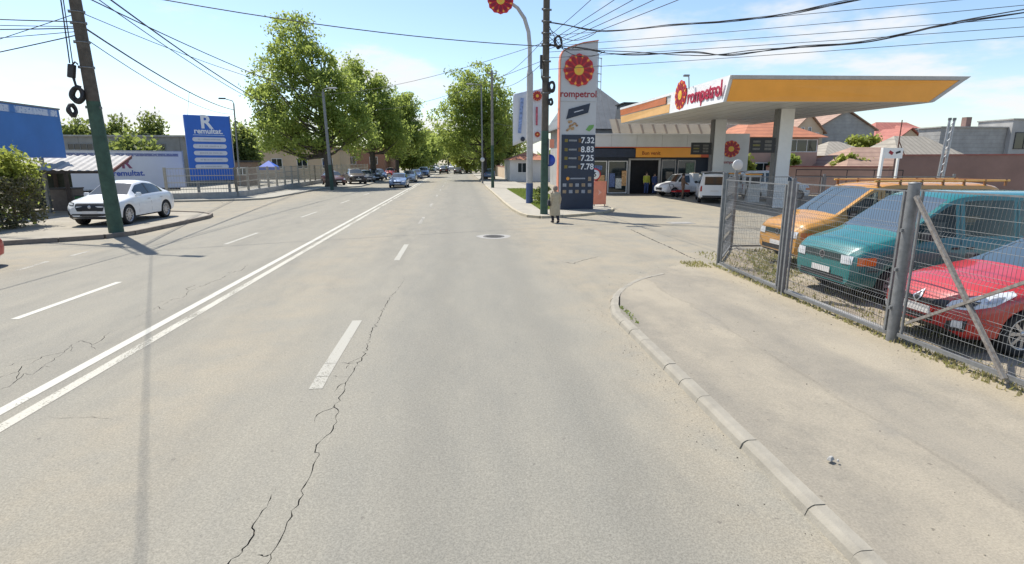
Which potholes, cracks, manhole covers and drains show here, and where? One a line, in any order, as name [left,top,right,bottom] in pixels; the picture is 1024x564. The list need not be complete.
crack [2,331,113,389]
crack [227,277,405,564]
